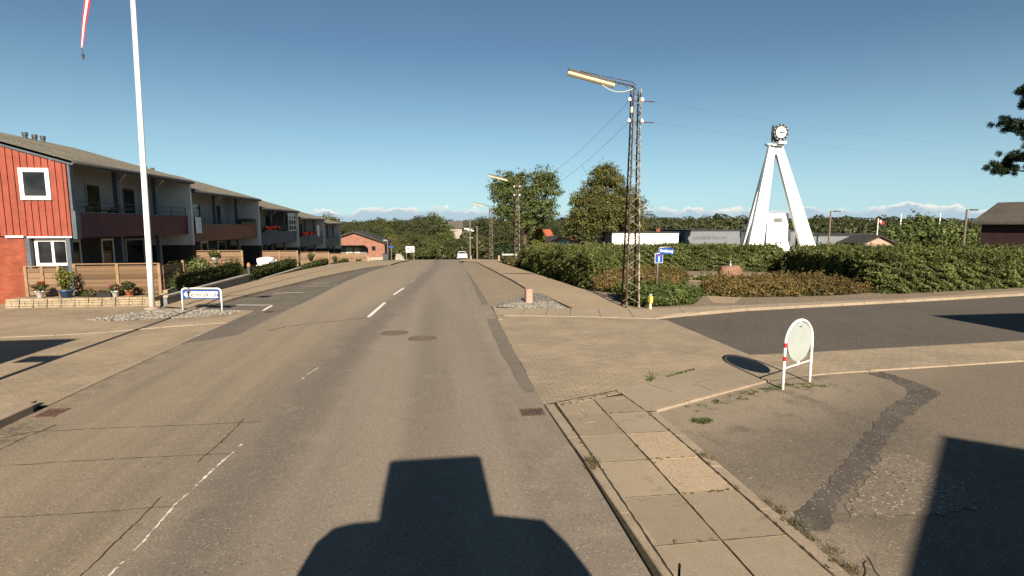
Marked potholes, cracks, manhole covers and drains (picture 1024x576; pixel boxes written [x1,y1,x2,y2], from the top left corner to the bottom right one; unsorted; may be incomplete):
crack [5,498,179,576]
drain grate [519,408,546,417]
crack [1,418,260,466]
drain grate [32,408,71,418]
